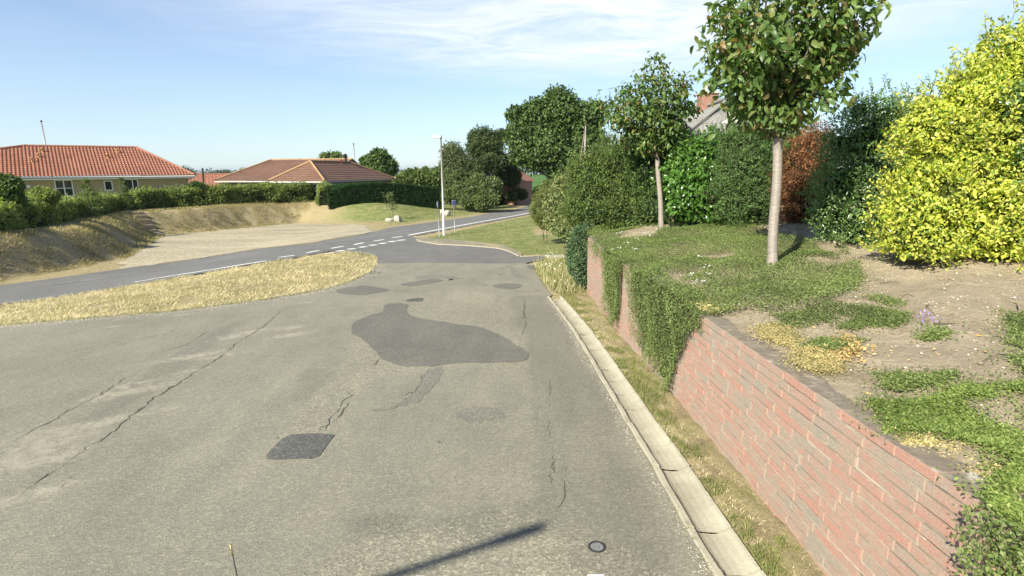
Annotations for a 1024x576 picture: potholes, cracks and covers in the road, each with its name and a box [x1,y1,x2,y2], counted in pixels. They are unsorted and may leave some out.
utility cover [588,541,606,553]
crack [18,311,280,497]
